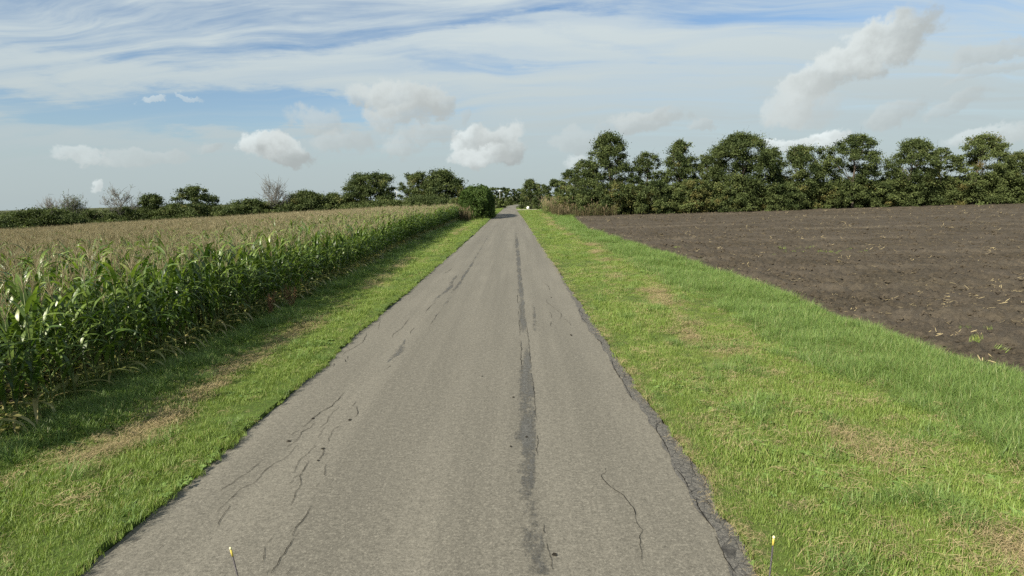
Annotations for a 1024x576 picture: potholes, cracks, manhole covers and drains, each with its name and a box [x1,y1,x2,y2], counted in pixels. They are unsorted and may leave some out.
crack [216,400,358,573]
